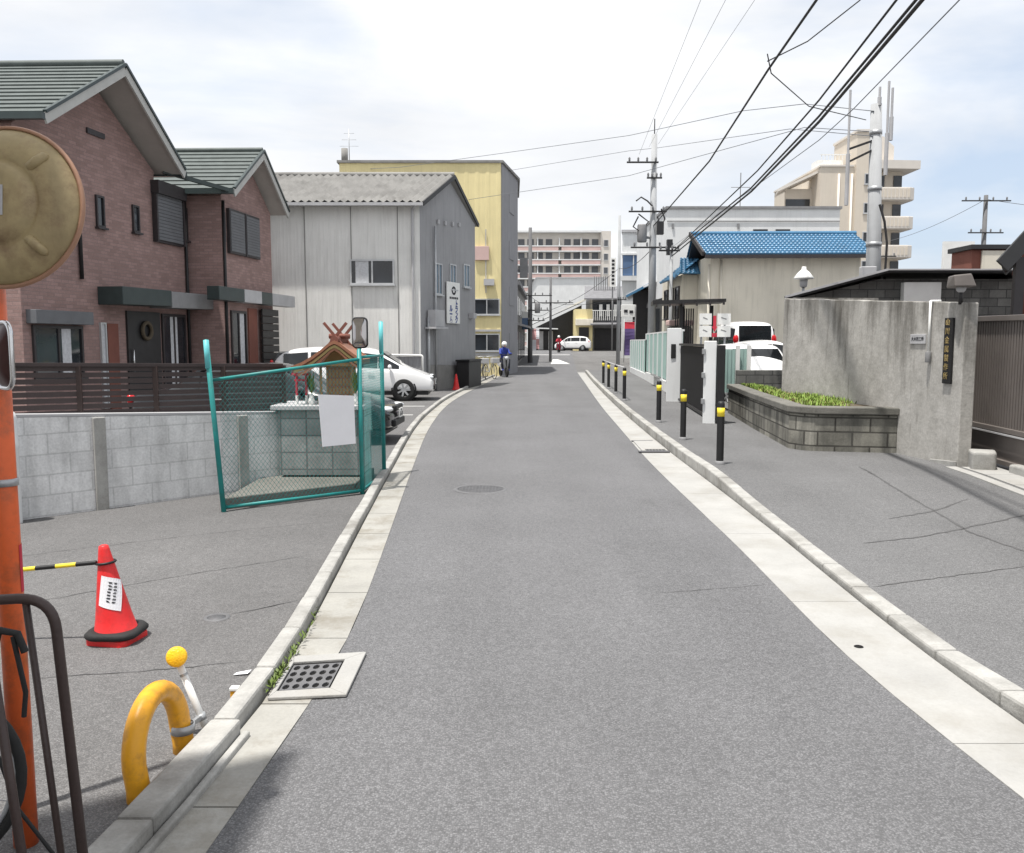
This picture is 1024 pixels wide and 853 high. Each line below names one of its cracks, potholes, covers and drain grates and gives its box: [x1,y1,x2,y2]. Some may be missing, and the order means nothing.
crack [45,660,250,678]
crack [859,466,1024,587]
manhole cover [453,484,508,494]
drain grate [633,440,667,450]
manhole cover [203,613,230,622]
drain grate [268,652,366,700]
